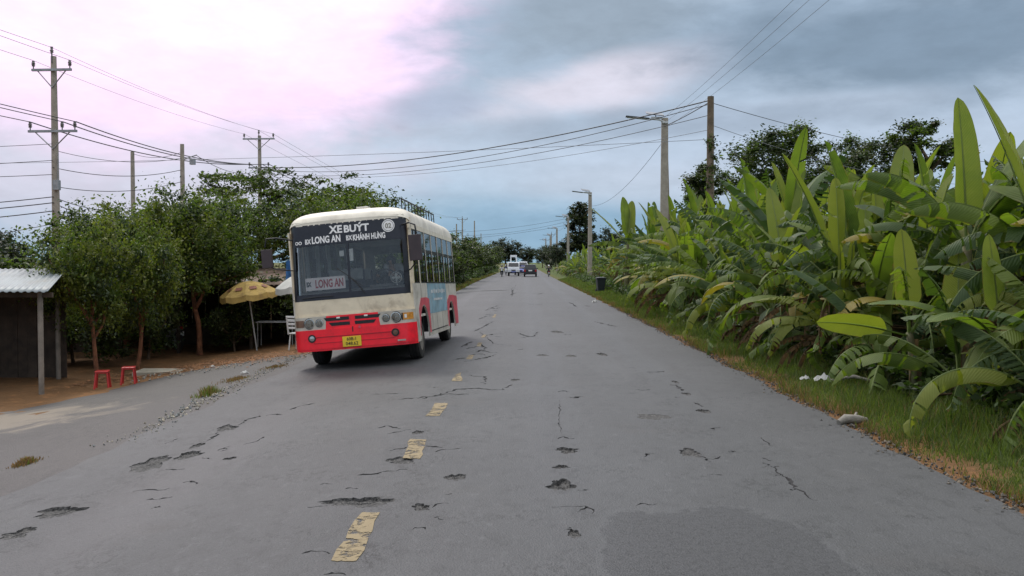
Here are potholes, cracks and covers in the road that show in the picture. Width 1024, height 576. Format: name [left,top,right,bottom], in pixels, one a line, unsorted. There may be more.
pothole [319,497,395,508]
pothole [412,503,430,511]
pothole [35,506,90,519]
crack [761,438,816,501]
pothole [0,527,37,541]
pothole [128,455,172,473]
pothole [386,456,415,464]
pothole [545,478,577,491]
pothole [679,448,702,458]
pothole [173,451,205,460]
